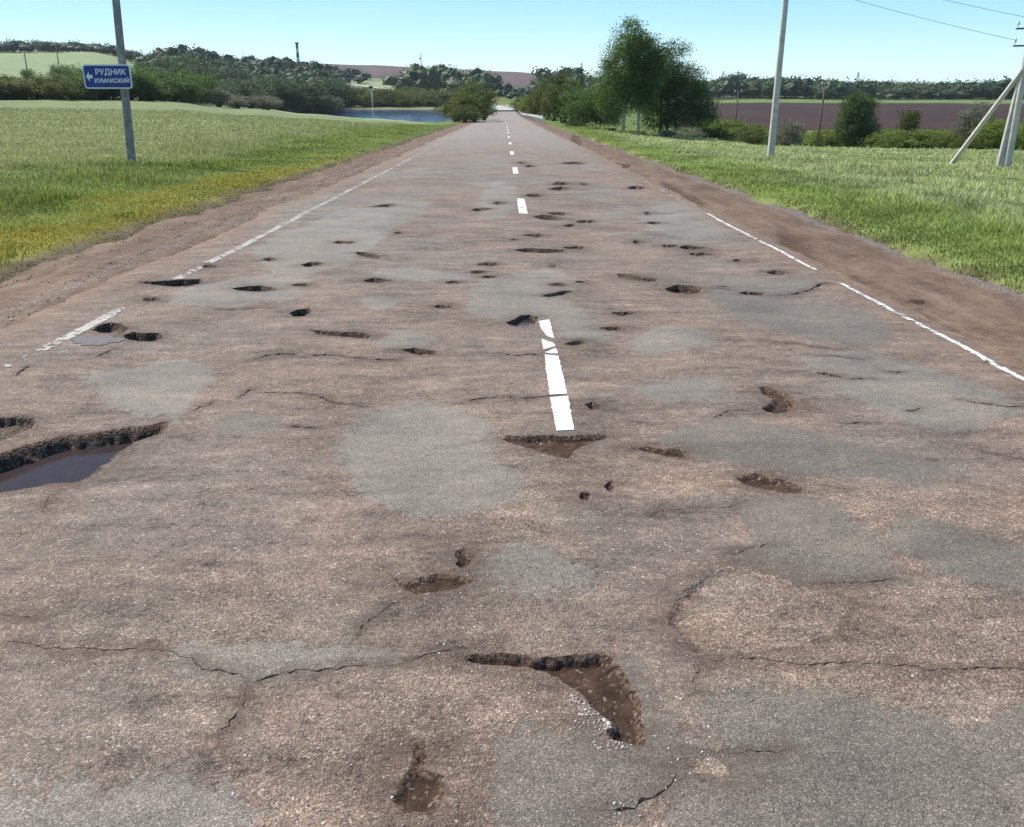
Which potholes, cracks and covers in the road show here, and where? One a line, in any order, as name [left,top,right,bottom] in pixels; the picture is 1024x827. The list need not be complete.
pothole [503,434,611,459]
pothole [665,285,702,294]
crack [698,657,1022,671]
pothole [460,652,647,747]
pothole [392,742,445,815]
pothole [506,315,538,327]
pothole [735,473,808,493]
pothole [124,332,163,341]
crack [12,641,456,757]
pothole [0,420,168,493]
pothole [758,386,797,414]
pothole [386,571,477,596]
